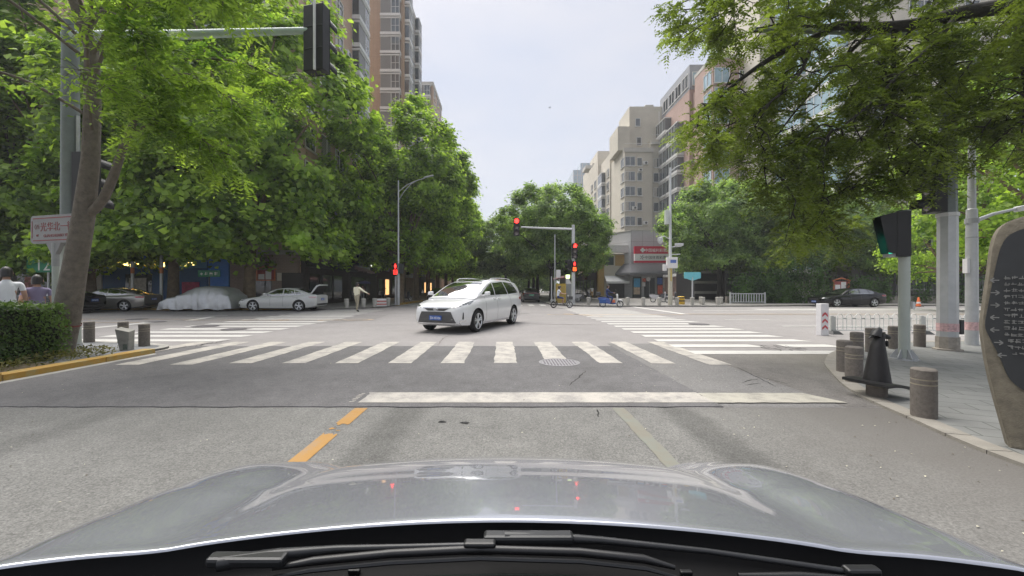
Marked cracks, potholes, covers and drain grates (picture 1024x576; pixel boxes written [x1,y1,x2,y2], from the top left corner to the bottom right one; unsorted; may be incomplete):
manhole cover [539,358,580,366]
